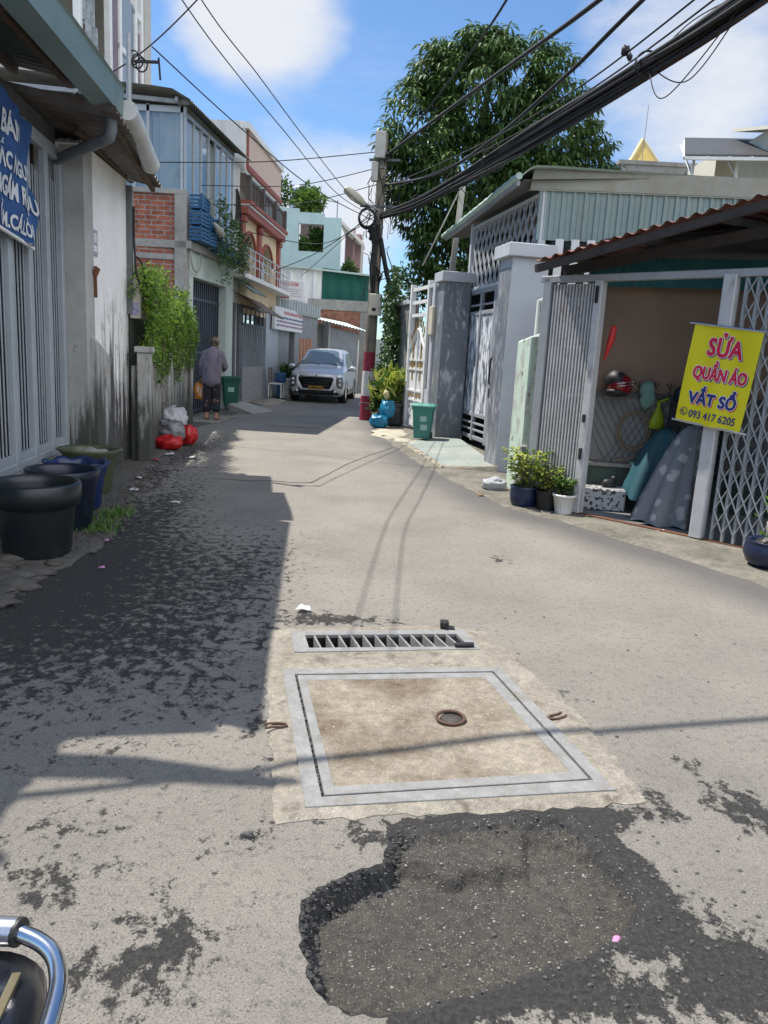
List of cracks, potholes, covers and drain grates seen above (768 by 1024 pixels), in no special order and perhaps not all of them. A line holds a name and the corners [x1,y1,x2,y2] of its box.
manhole cover [282,667,616,808]
drain grate [290,629,481,653]
